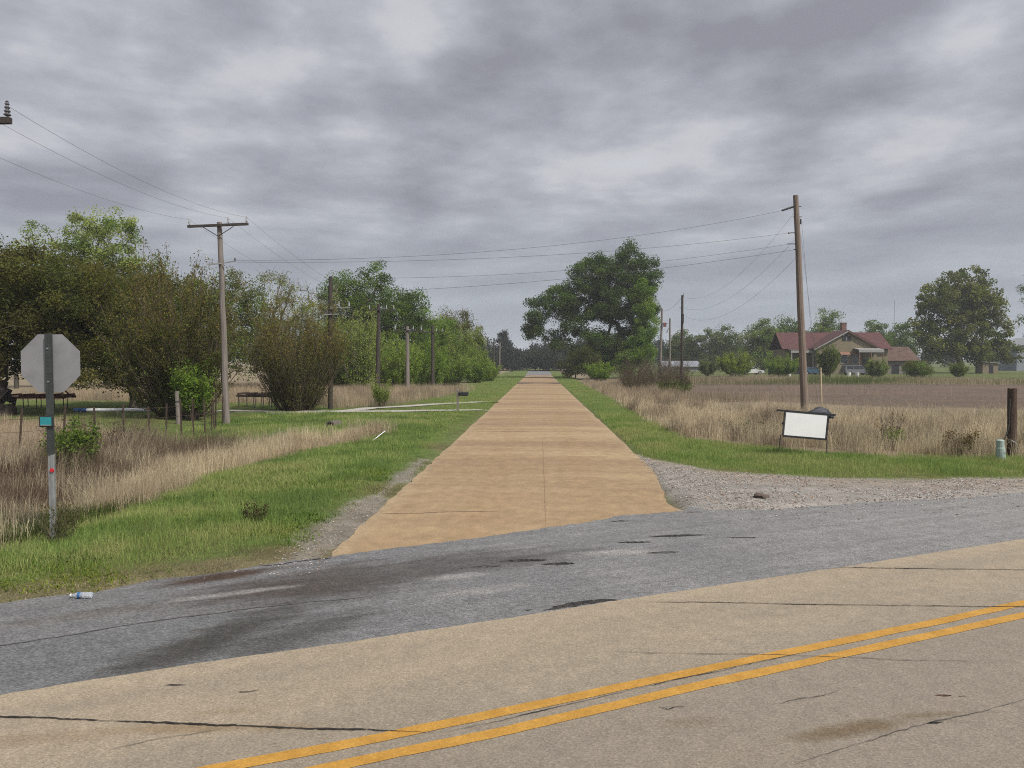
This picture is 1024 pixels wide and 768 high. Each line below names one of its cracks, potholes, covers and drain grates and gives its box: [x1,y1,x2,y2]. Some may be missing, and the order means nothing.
crack [796,699,1023,764]
